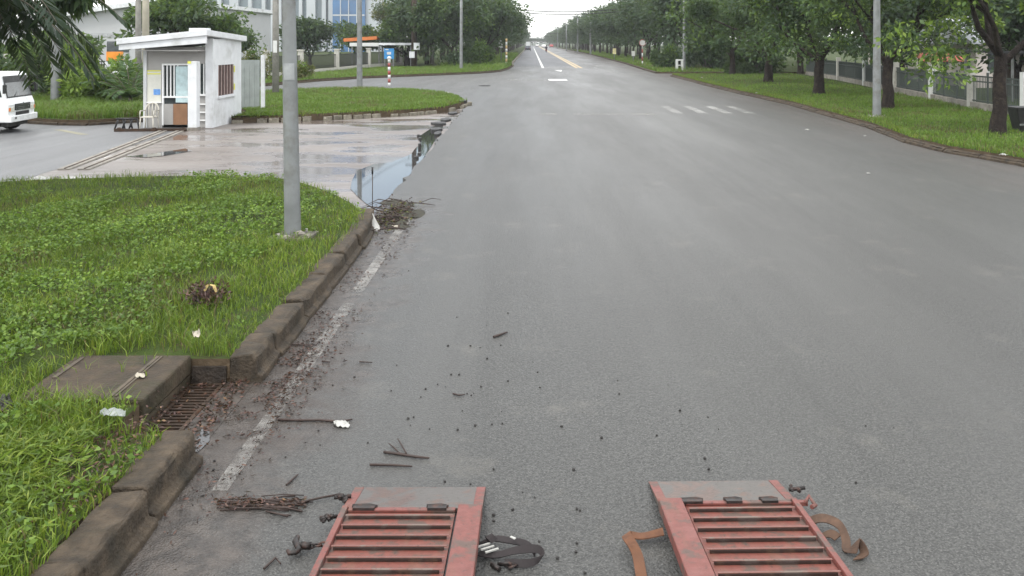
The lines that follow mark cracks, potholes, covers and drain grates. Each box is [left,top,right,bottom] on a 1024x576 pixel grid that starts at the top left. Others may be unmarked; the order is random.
drain grate [141,383,225,434]
